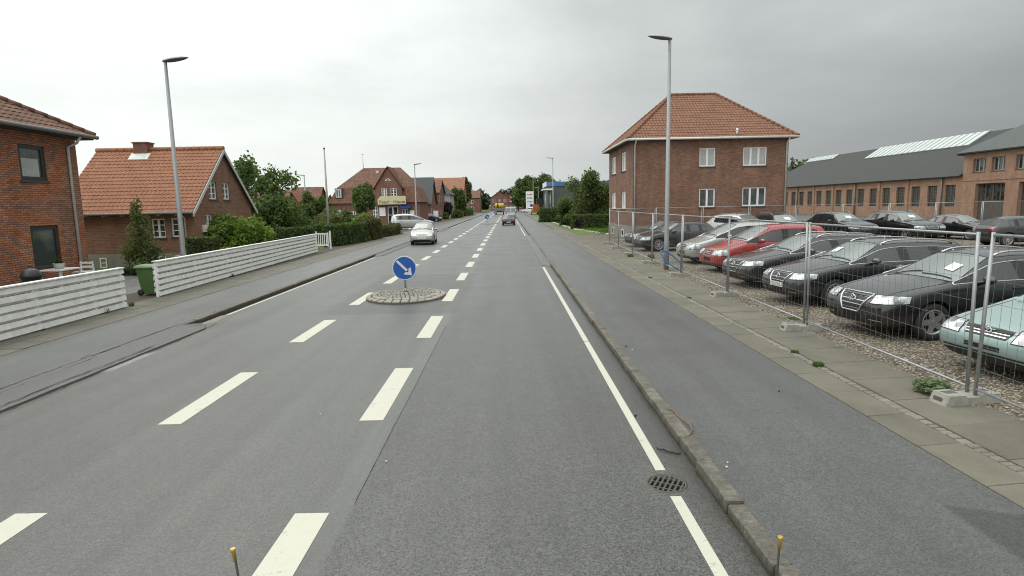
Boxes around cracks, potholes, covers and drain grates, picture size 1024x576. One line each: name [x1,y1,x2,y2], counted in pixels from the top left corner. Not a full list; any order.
drain grate [646,474,687,493]
